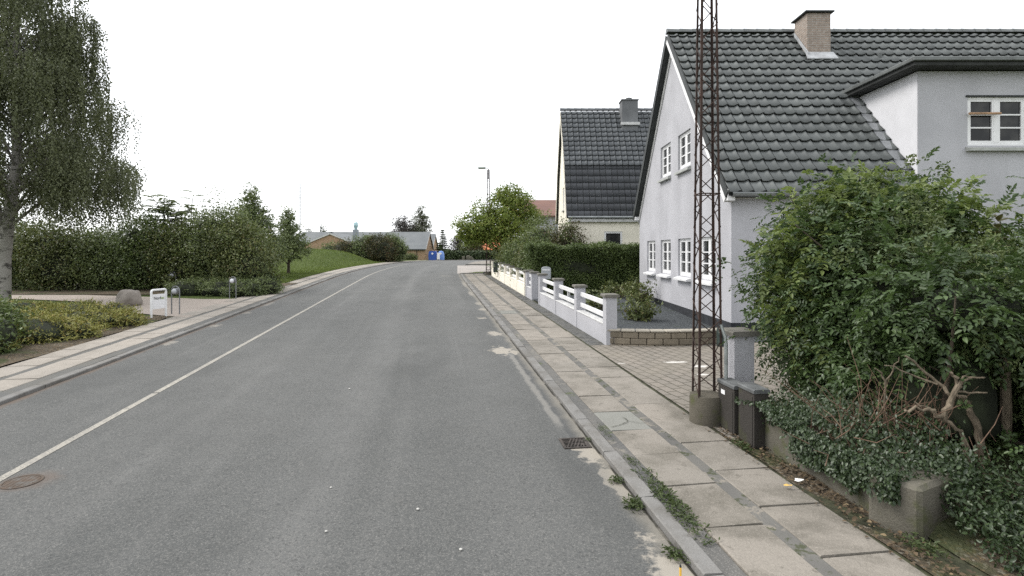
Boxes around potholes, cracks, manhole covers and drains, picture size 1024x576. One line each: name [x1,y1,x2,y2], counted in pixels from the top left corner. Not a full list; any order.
manhole cover [0,474,45,489]
drain grate [558,437,592,449]
